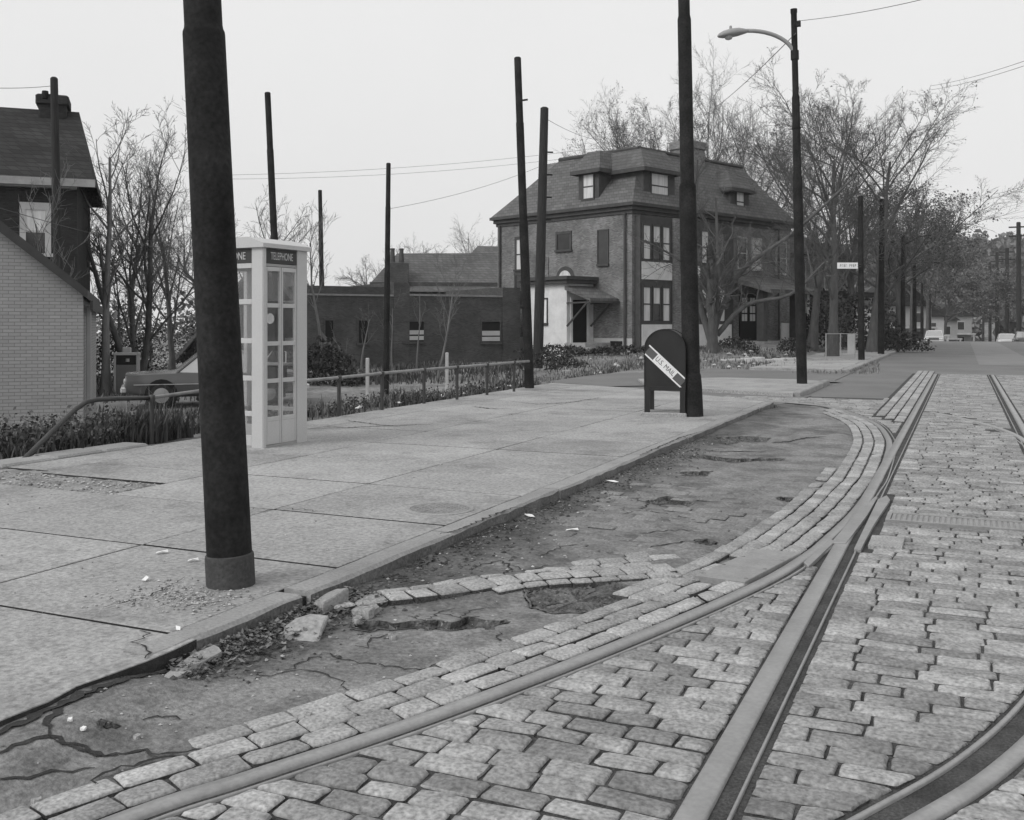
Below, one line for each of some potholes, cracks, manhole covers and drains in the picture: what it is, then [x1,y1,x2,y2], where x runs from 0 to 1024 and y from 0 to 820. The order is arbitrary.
crack [475,545,589,574]
pothole [351,616,511,633]
pothole [646,496,694,507]
pothole [691,455,786,463]
manhole cover [406,502,474,515]
pothole [523,582,629,614]
crack [0,630,200,784]
crack [255,634,435,690]
drain grate [885,512,1024,532]
pothole [714,436,771,445]
